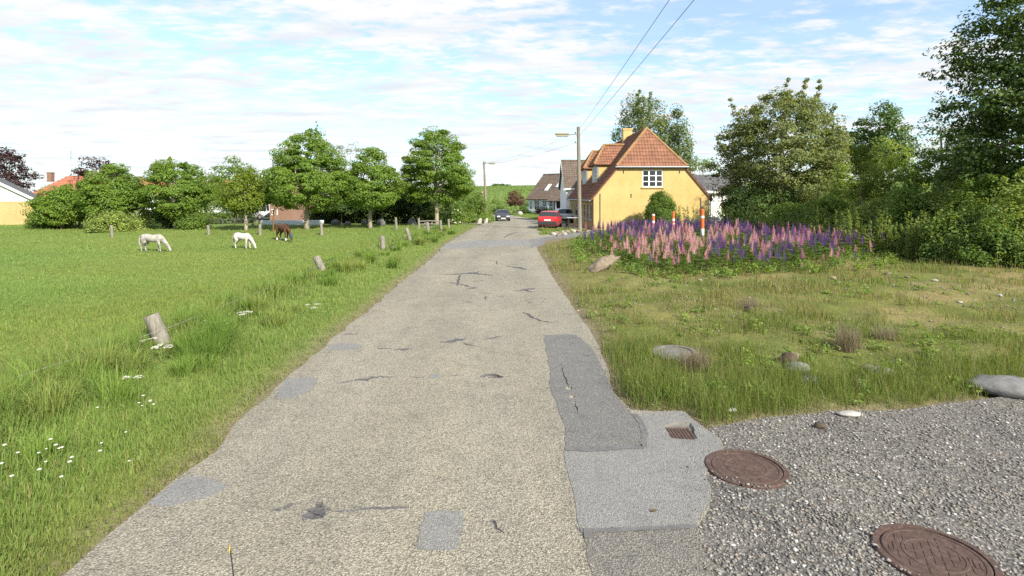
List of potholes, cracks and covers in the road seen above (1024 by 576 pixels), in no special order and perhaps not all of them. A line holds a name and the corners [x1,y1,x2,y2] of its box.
crack [515,288,554,323]
crack [270,502,408,521]
crack [335,376,395,384]
manhole cover [871,523,1005,576]
crack [444,232,527,302]
manhole cover [704,449,790,489]
